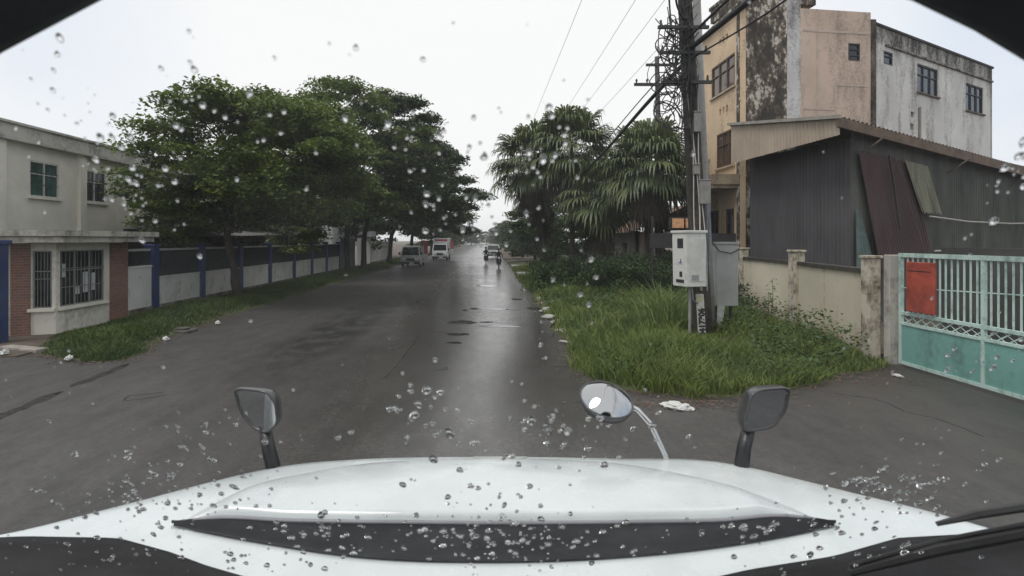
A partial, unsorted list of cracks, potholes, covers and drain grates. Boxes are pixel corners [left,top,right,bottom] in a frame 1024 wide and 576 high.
crack [820,391,984,437]
